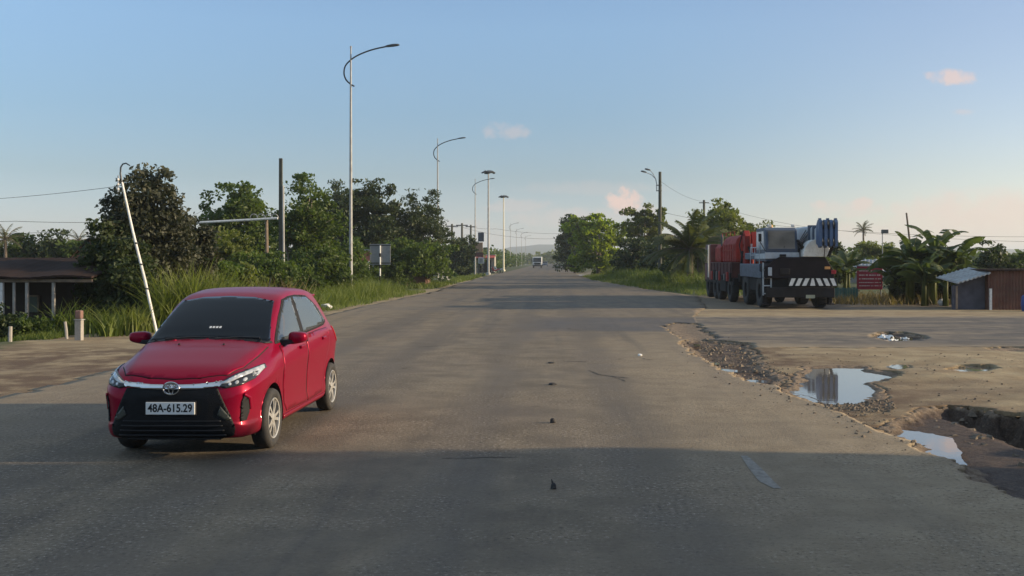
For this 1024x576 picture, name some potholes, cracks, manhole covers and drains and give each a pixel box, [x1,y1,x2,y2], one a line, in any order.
pothole [679,340,791,386]
pothole [781,365,898,405]
pothole [872,406,1024,500]
pothole [872,333,924,341]
pothole [663,323,715,344]
